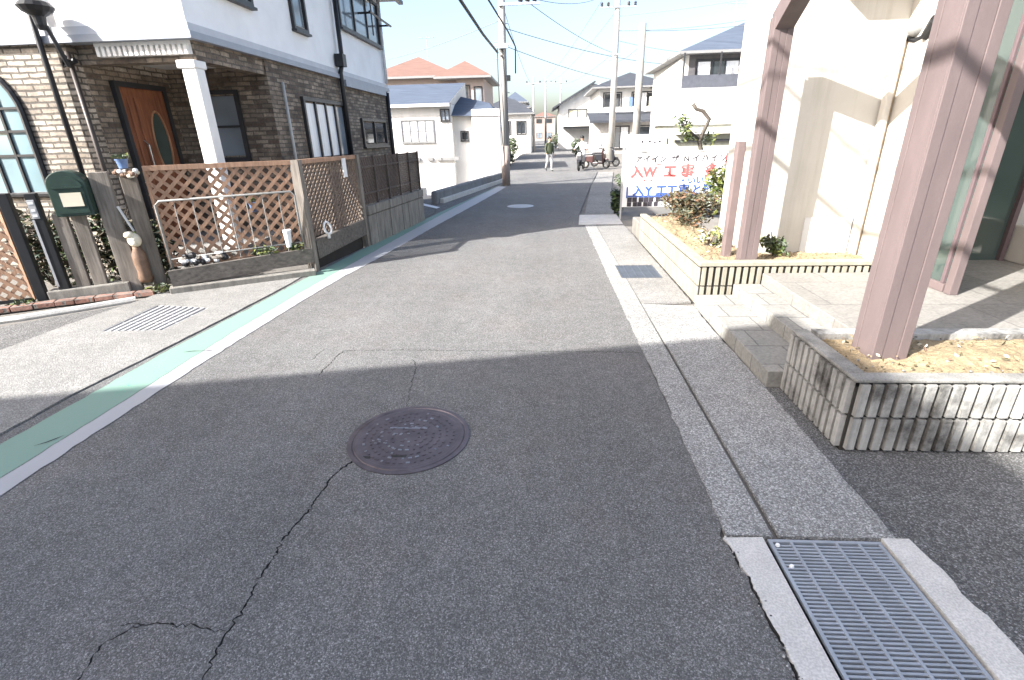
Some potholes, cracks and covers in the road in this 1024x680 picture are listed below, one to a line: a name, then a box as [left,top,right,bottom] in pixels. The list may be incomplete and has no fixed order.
manhole cover [347,406,470,475]
drain grate [767,539,994,680]
drain grate [102,305,207,331]
crack [77,461,352,680]
drain grate [616,265,662,279]
